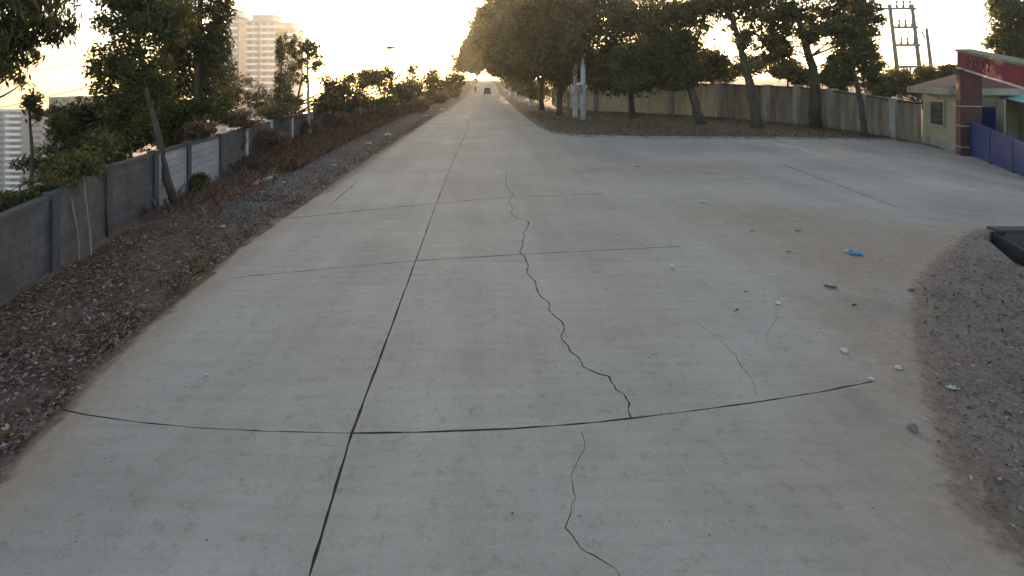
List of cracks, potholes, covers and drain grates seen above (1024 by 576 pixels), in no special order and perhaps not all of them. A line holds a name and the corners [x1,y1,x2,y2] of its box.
crack [565,431,620,576]
crack [505,181,632,419]
